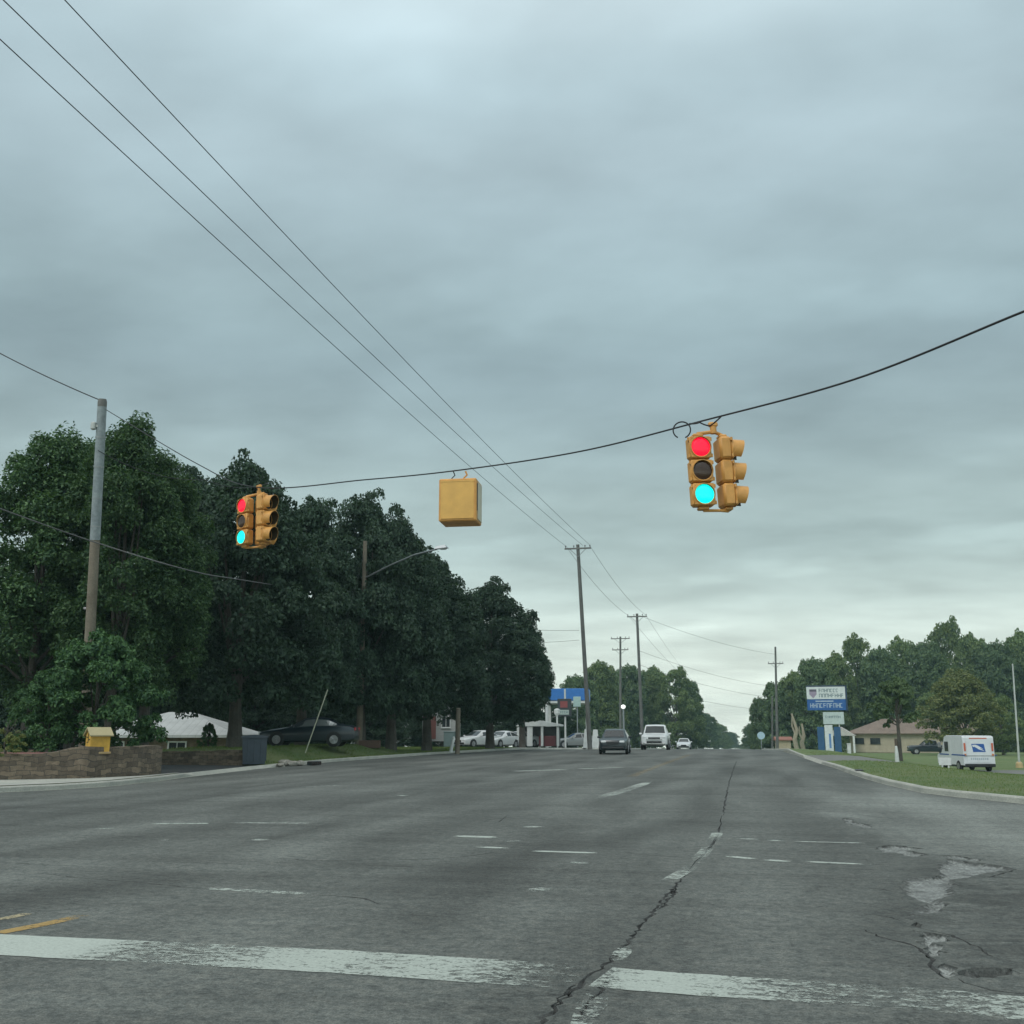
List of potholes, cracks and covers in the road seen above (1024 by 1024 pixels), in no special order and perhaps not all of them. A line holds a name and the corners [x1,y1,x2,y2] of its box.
pothole [899,859,1018,921]
pothole [957,967,1013,978]
pothole [912,930,951,958]
pothole [876,845,929,857]
crack [852,869,1024,994]
pothole [937,963,958,978]
pothole [842,818,872,828]
